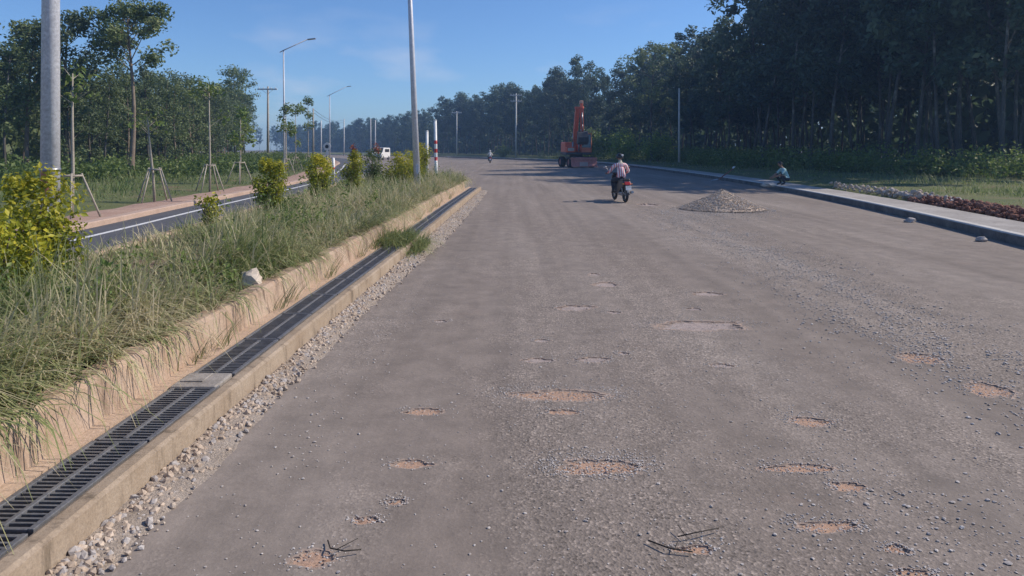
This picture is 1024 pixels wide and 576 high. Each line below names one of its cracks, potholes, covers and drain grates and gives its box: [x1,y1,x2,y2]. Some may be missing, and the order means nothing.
pothole [557,459,643,474]
drain grate [311,279,358,295]
pothole [896,352,945,364]
pothole [659,321,742,331]
pothole [353,516,382,524]
pothole [288,549,337,568]
drain grate [282,294,337,314]
drain grate [353,256,388,267]
pothole [672,545,712,554]
pothole [830,482,866,492]
drain grate [193,339,279,377]
drain grate [334,266,374,279]
